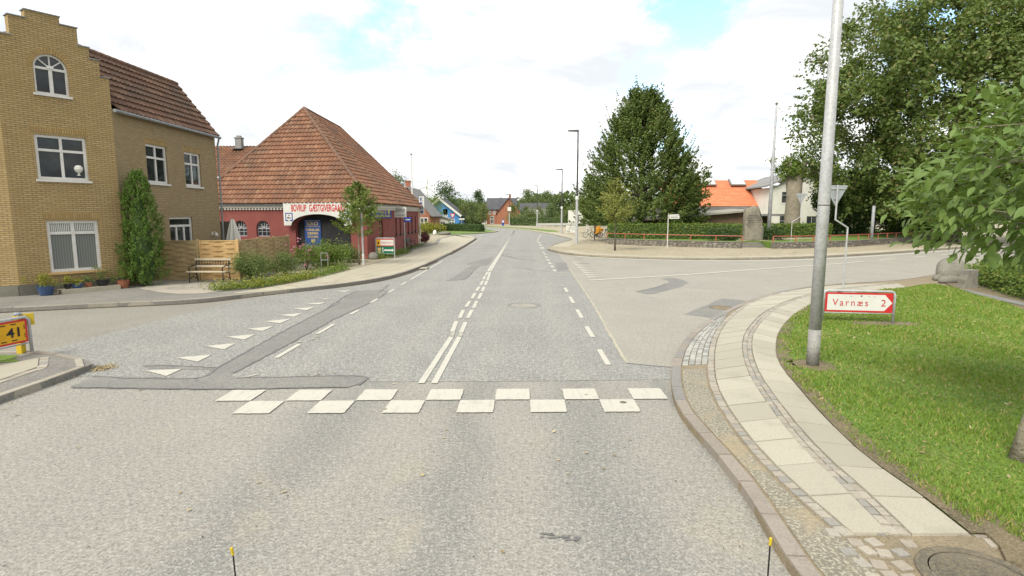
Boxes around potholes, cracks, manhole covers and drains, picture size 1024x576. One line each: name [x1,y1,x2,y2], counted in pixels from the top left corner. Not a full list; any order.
manhole cover [914,546,1024,576]
